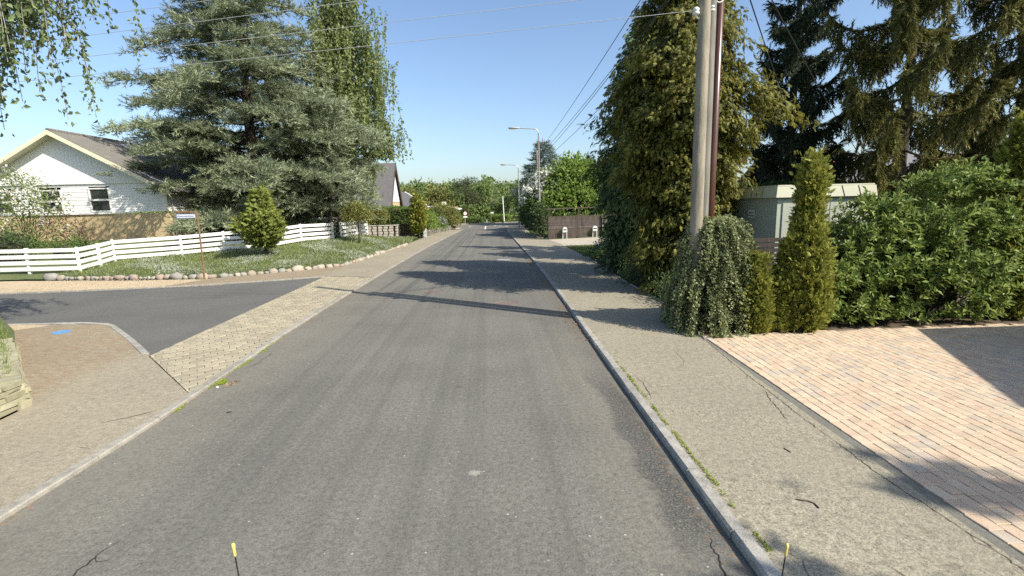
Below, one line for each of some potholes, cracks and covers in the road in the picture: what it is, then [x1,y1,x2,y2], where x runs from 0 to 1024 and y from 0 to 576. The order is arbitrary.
crack [73,540,120,576]
crack [710,539,727,576]
